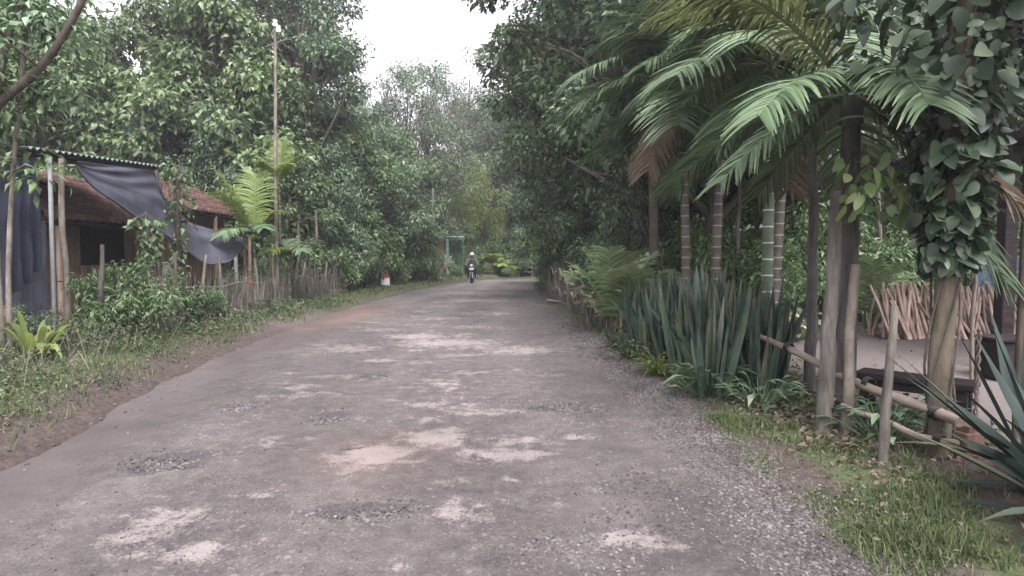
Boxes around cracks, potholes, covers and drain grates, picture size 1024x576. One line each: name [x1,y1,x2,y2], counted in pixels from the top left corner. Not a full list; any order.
pothole [120,448,215,477]
pothole [306,501,418,522]
pothole [523,401,599,414]
pothole [313,410,350,423]
